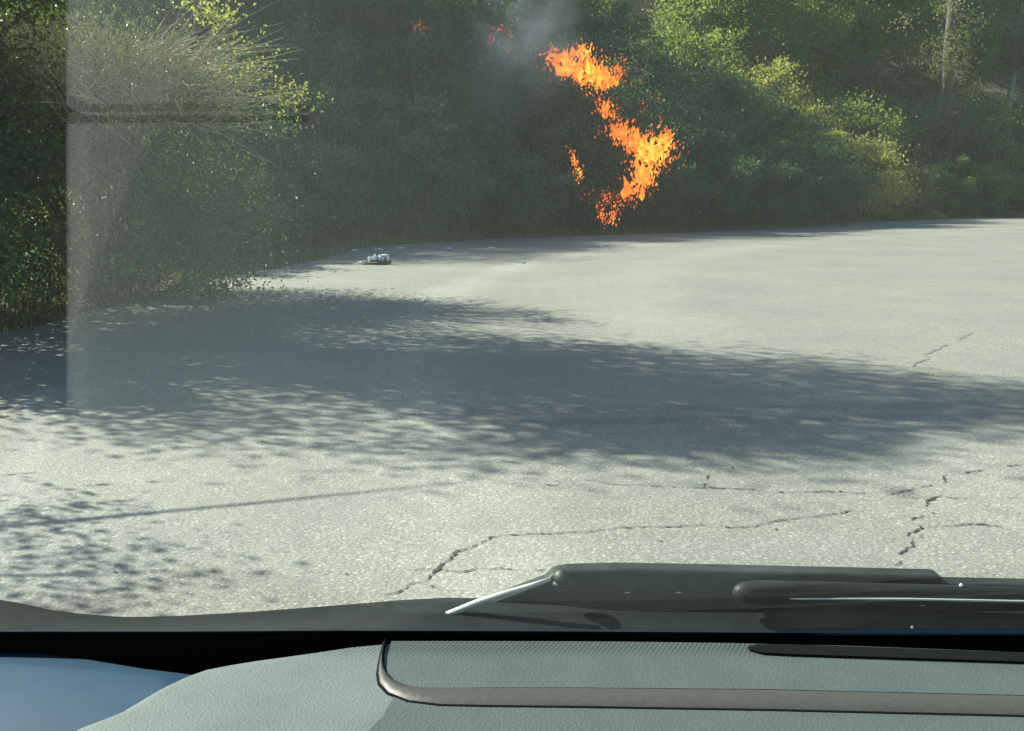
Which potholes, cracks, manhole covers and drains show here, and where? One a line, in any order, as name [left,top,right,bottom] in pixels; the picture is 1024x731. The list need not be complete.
crack [724,510,864,527]
crack [672,475,757,490]
crack [384,524,703,595]
crack [891,475,972,565]
crack [913,332,973,367]
